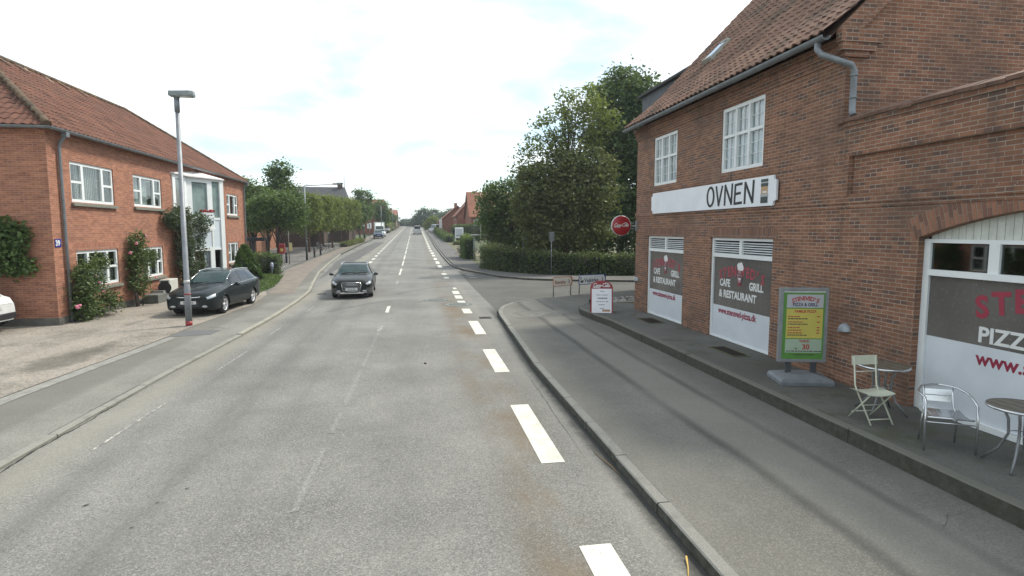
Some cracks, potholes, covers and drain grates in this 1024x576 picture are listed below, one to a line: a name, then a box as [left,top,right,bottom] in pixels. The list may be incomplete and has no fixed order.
drain grate [709,346,750,357]
